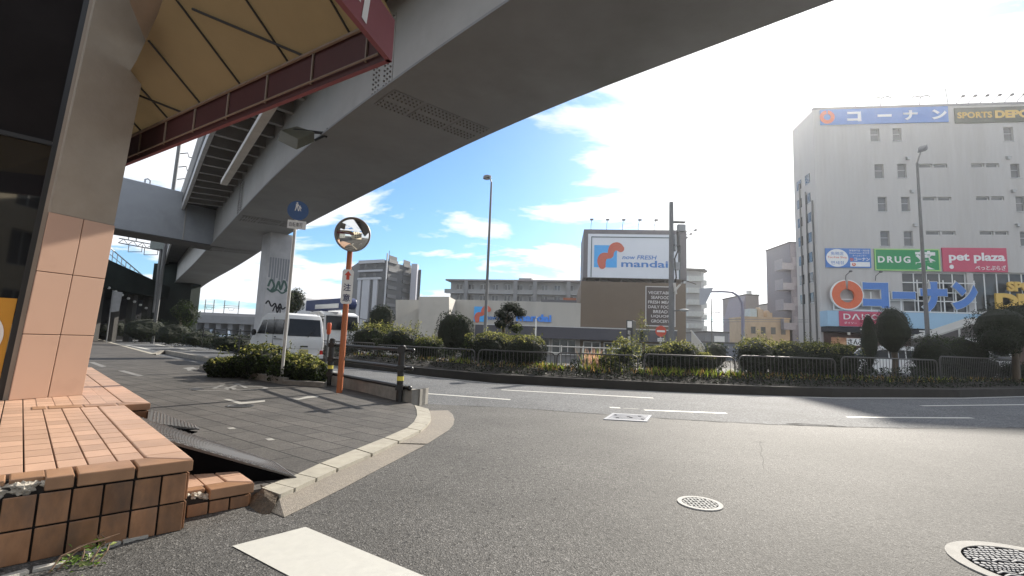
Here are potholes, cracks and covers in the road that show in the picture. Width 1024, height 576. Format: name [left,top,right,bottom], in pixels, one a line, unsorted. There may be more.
manhole cover [945,541,1024,576]
manhole cover [603,413,652,422]
